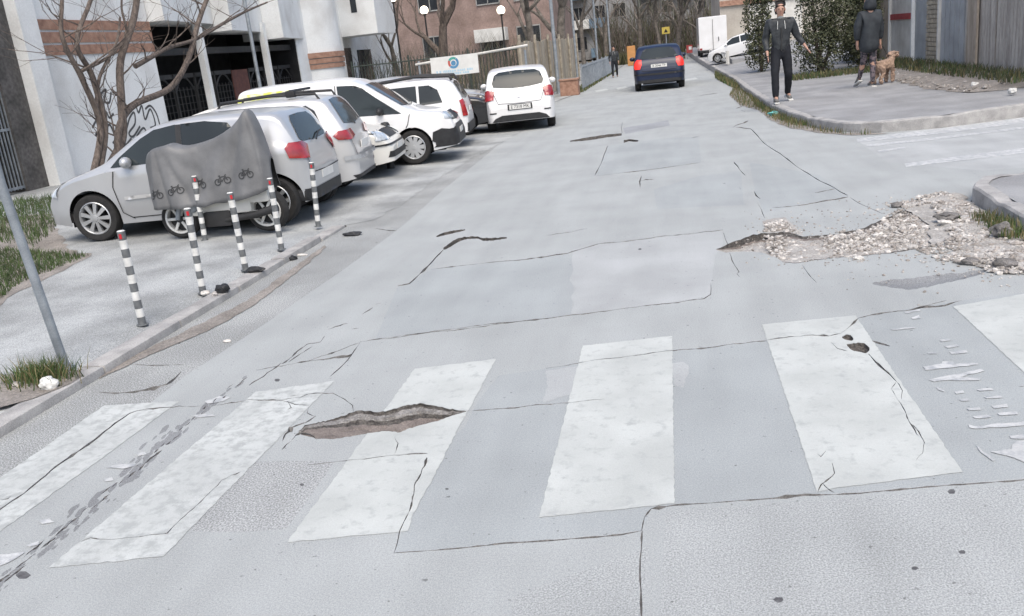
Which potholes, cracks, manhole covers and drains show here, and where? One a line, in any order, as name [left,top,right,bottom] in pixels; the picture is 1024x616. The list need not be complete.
crack [214,228,739,449]
crack [595,122,695,185]
pothole [299,403,466,439]
pothole [716,210,948,263]
crack [723,106,880,216]
pothole [847,343,870,353]
